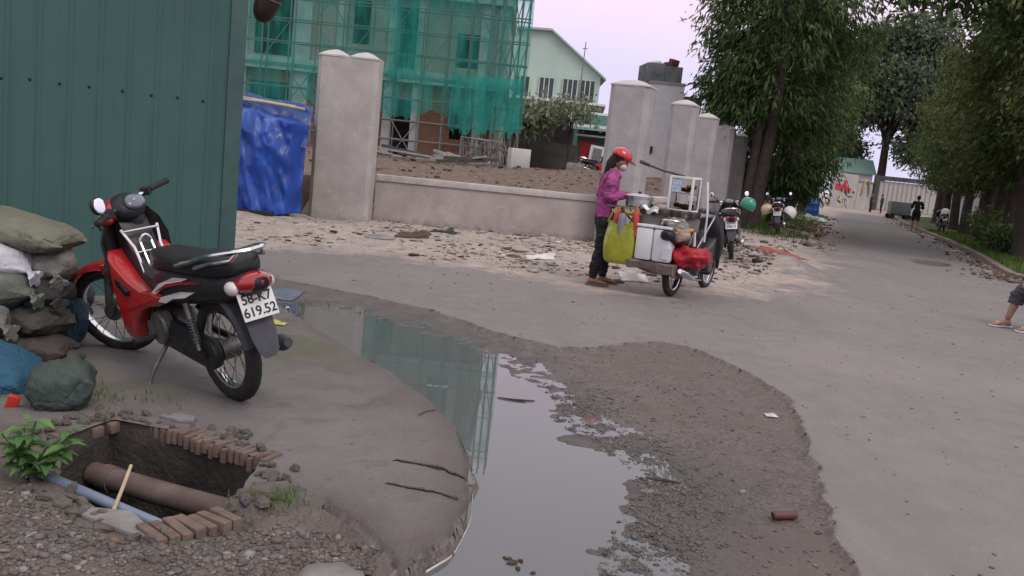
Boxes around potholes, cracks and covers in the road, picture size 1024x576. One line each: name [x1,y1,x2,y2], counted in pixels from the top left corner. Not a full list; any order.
crack [386,458,467,500]
pothole [271,278,861,576]
